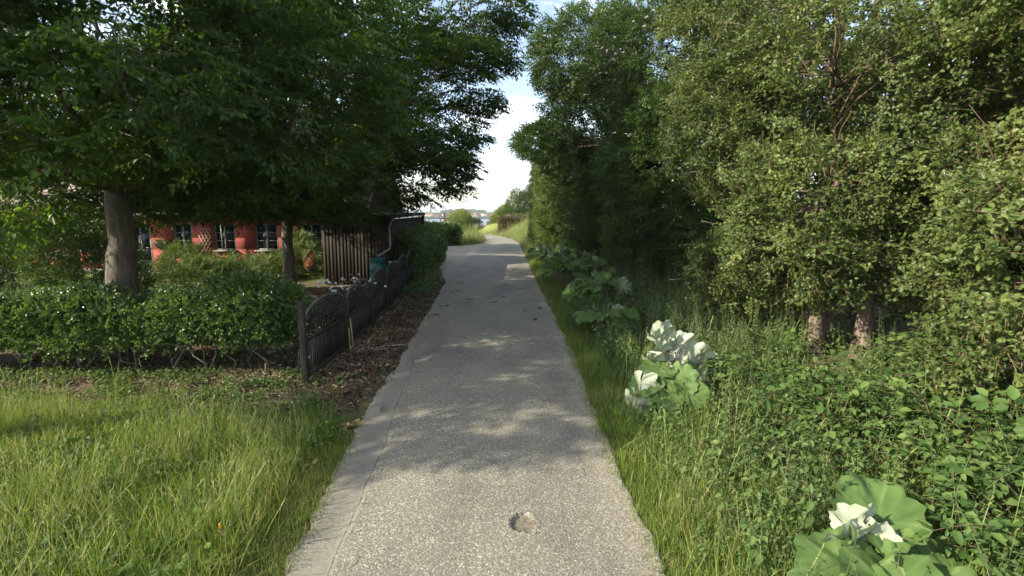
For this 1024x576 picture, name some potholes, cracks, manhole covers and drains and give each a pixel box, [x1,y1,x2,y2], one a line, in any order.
pothole [505,509,543,537]
